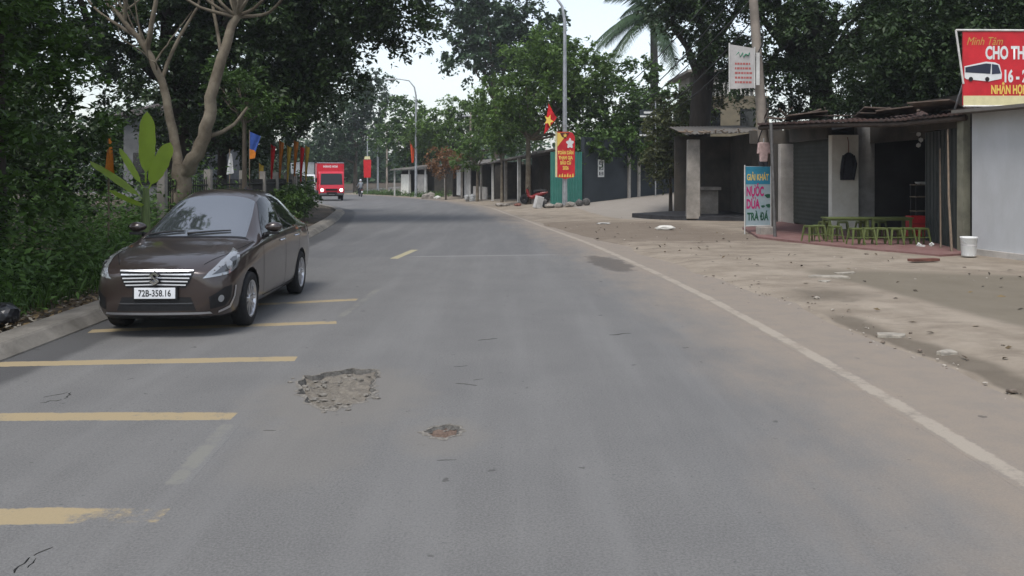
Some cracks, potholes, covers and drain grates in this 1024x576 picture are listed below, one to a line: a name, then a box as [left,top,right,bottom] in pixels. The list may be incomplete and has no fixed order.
crack [13,547,52,573]
pothole [417,423,466,440]
pothole [287,368,382,413]
